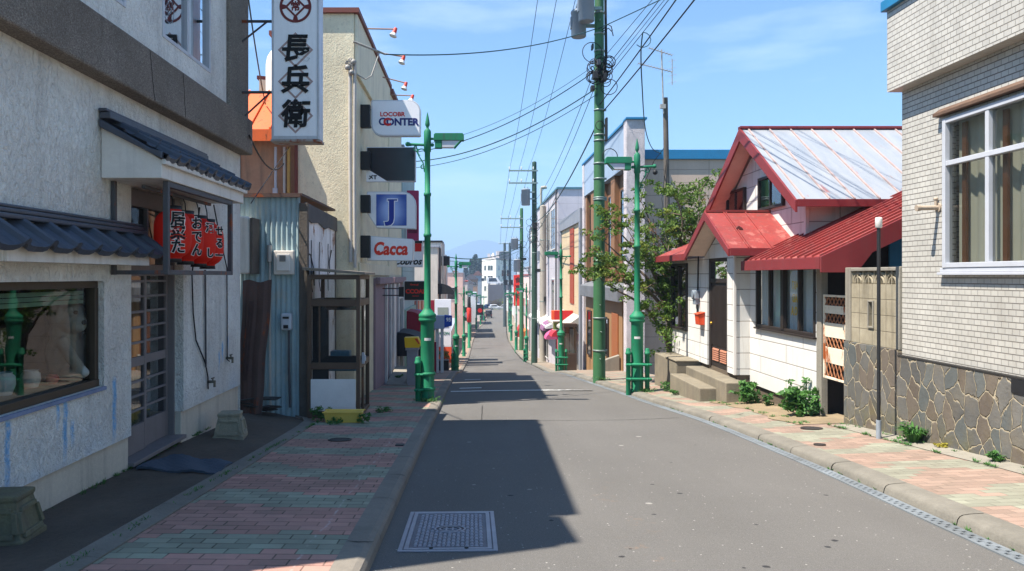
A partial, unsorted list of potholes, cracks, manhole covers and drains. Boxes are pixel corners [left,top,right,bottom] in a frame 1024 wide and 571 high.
manhole cover [397,511,498,553]
